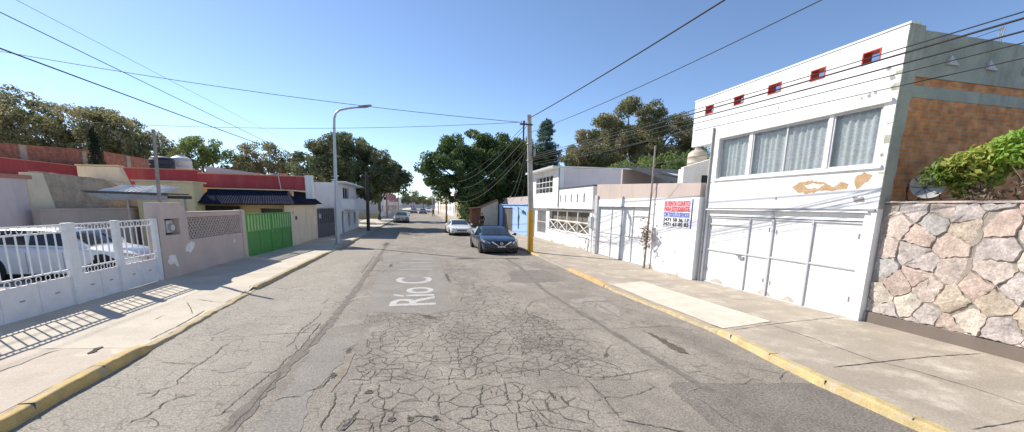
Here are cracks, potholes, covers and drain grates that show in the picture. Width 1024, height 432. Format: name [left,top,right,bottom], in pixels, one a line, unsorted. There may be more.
crack [692,366,788,429]
crack [129,261,681,432]
pothole [643,330,690,355]
